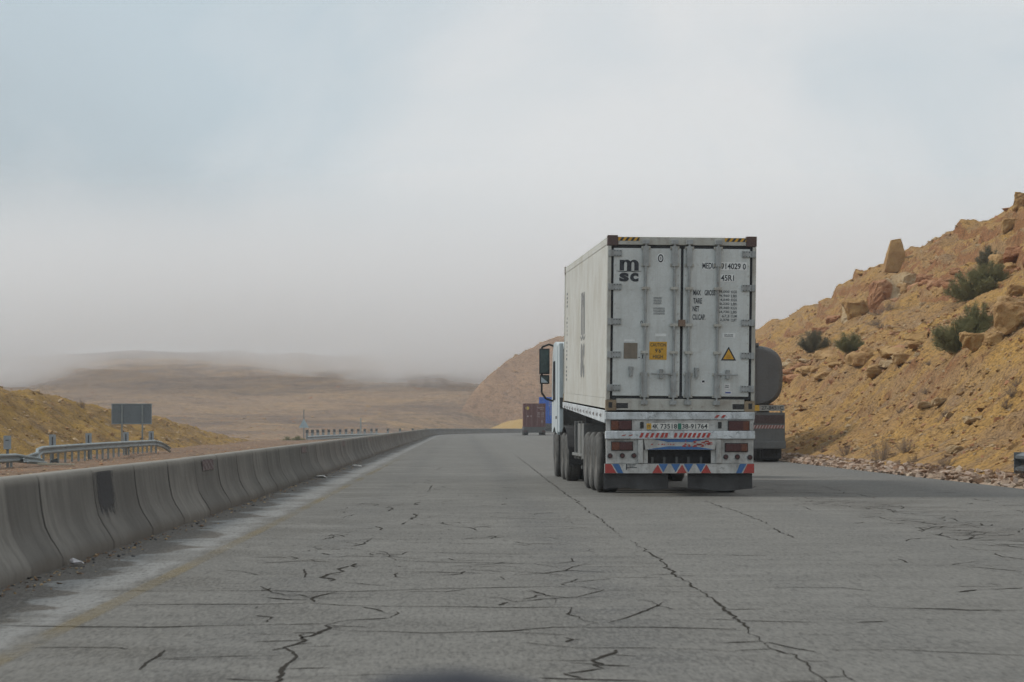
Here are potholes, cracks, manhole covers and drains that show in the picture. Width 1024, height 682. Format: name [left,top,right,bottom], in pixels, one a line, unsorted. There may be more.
crack [710,482,869,538]
crack [16,459,827,682]
crack [801,490,1024,559]
